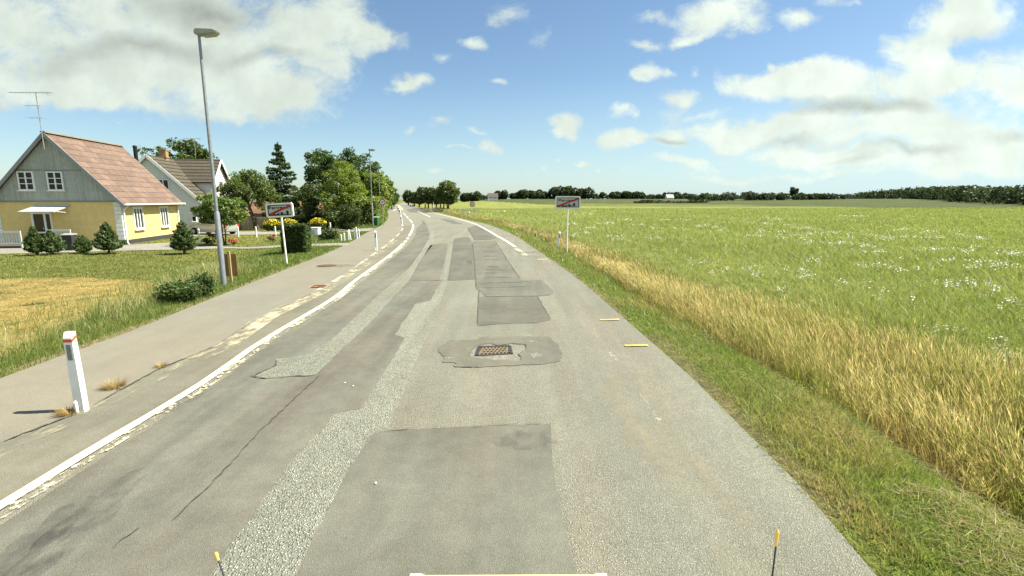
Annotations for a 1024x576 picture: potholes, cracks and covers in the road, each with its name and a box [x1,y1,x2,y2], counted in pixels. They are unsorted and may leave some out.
crack [175,361,320,518]
